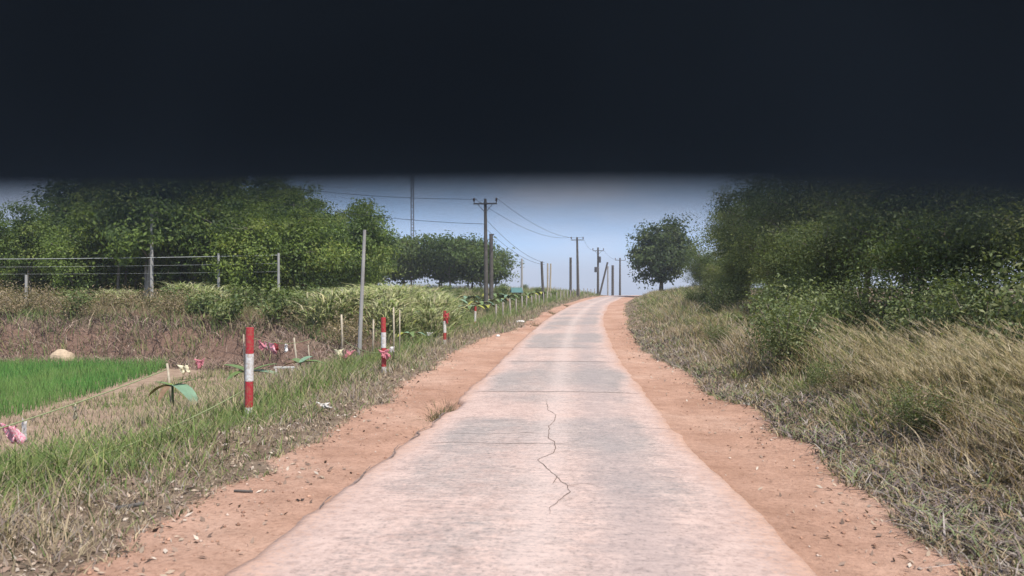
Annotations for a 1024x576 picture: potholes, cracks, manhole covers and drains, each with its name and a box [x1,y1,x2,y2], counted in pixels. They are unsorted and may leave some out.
crack [320,403,594,509]
